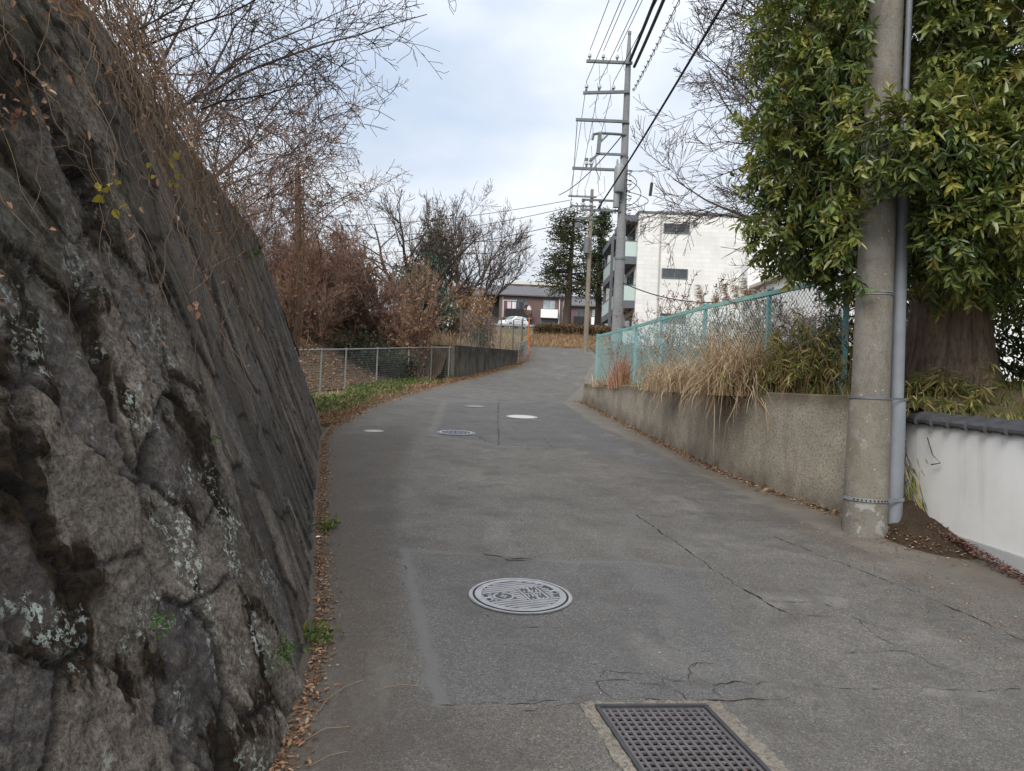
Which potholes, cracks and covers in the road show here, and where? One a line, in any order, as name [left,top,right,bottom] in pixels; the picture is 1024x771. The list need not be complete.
crack [596,661,789,701]
crack [637,497,1017,676]
drain grate [580,699,790,771]
manhole cover [469,578,572,614]
